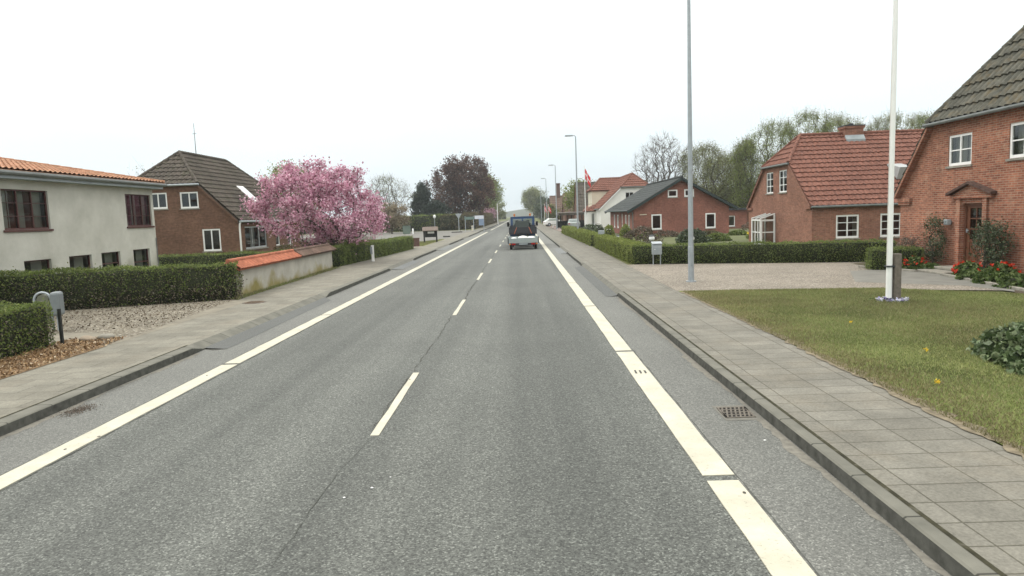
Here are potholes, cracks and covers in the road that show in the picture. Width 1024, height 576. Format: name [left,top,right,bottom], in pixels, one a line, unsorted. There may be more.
drain grate [712,405,764,421]
